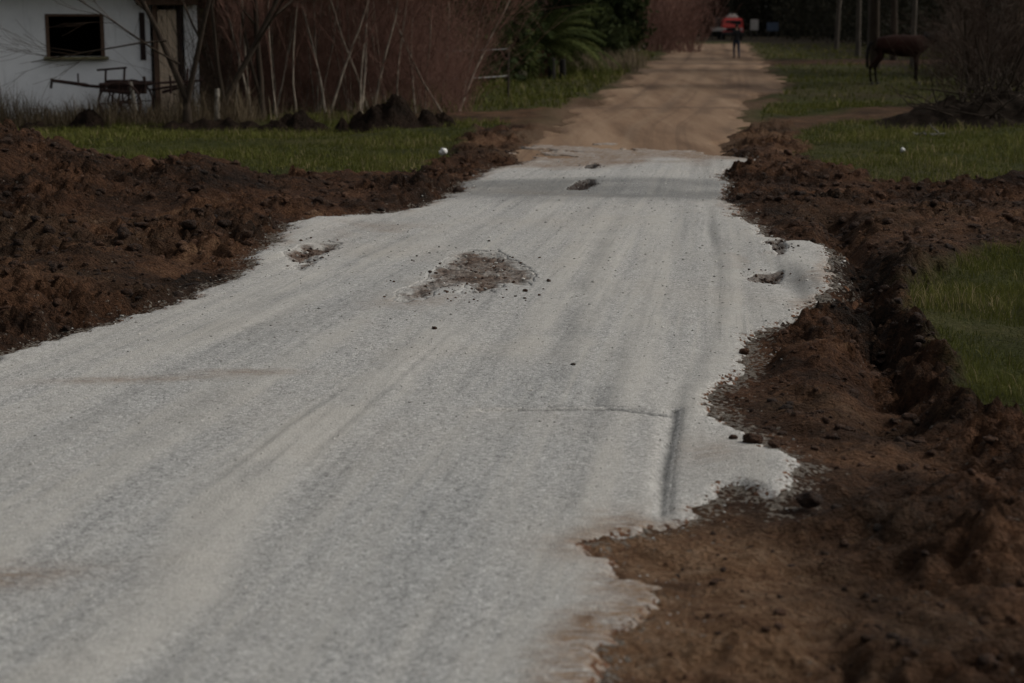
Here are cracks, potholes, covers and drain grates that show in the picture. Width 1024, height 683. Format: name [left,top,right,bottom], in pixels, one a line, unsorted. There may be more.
pothole [283,242,341,270]
pothole [747,271,783,284]
crack [475,406,682,517]
pothole [565,179,597,190]
pothole [393,250,536,303]
